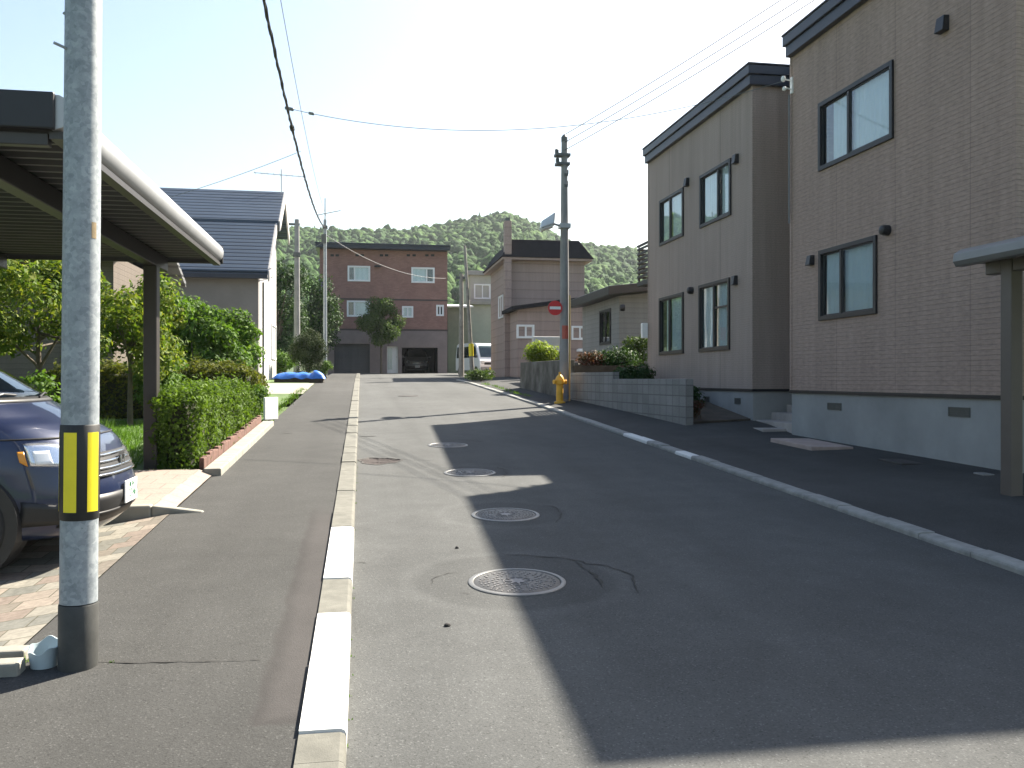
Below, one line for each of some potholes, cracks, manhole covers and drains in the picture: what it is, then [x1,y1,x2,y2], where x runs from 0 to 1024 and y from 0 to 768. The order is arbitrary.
manhole cover [468,568,566,596]
manhole cover [444,468,496,477]
crack [502,553,639,593]
manhole cover [471,508,540,522]
